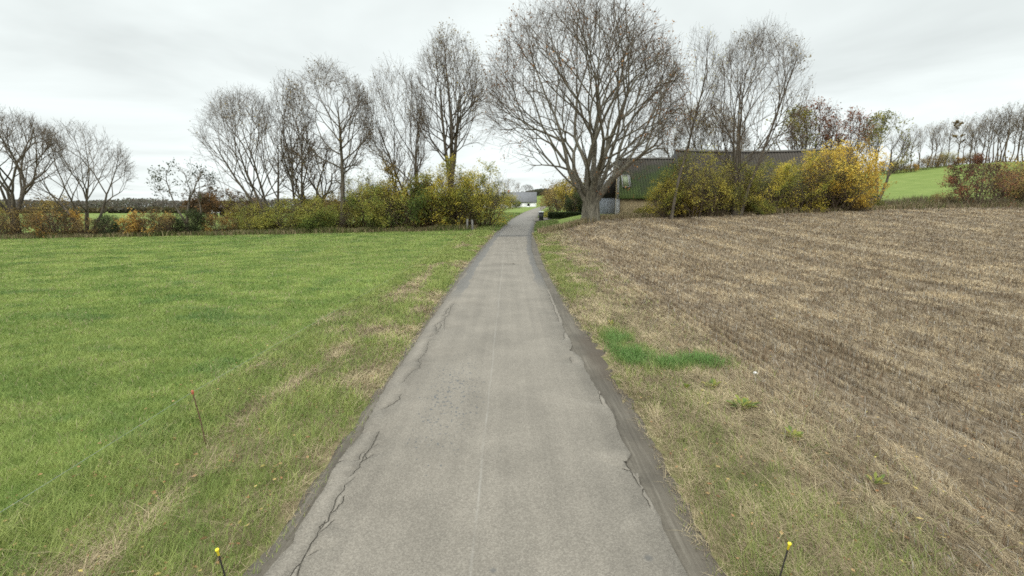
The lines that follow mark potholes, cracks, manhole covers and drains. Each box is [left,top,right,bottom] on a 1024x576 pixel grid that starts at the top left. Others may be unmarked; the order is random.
crack [290,432,379,576]
